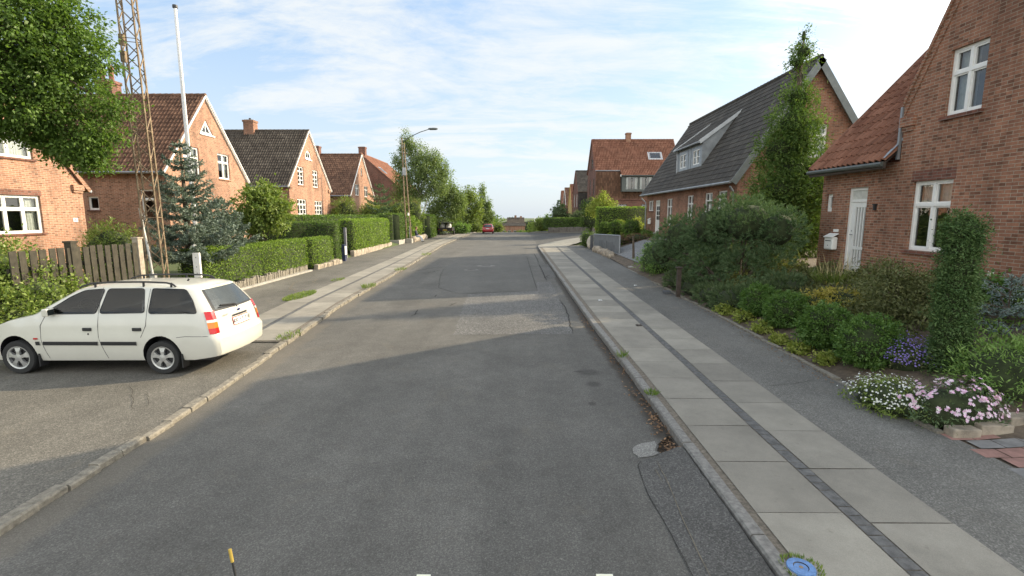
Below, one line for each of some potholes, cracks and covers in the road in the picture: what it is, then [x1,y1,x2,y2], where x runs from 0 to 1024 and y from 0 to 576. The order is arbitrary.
manhole cover [786,558,817,576]
